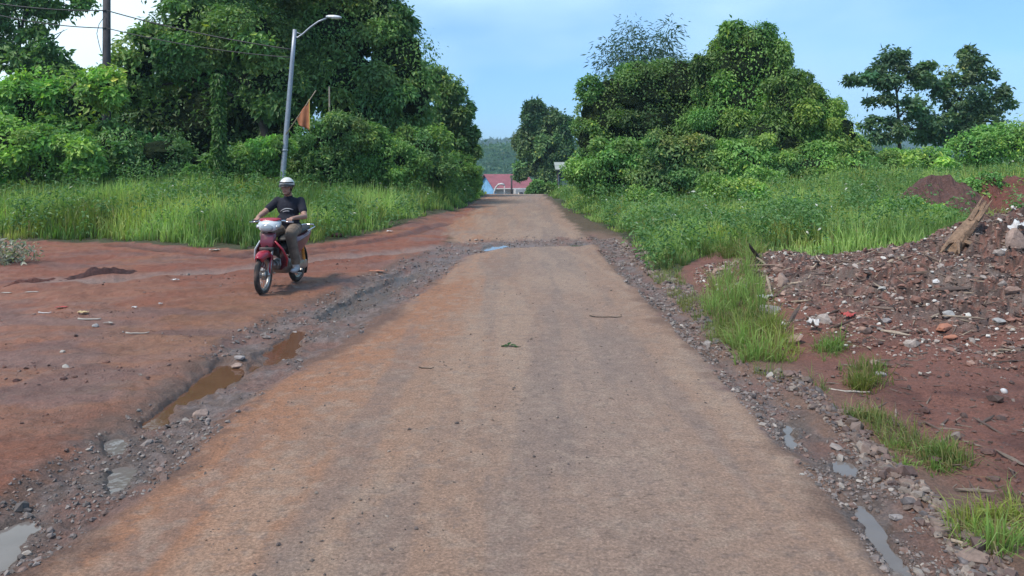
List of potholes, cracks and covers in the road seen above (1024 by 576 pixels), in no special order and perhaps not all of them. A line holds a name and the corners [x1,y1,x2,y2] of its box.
pothole [133,355,246,431]
pothole [847,502,921,576]
pothole [818,457,866,482]
pothole [0,516,48,573]
pothole [93,458,144,498]
pothole [241,329,309,374]
pothole [773,423,805,453]
pothole [91,432,136,458]
